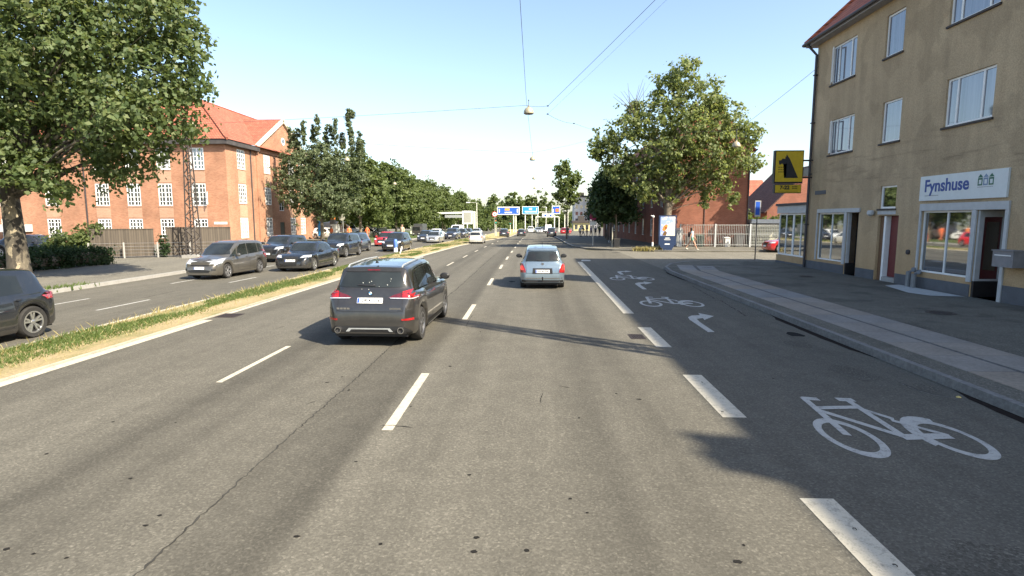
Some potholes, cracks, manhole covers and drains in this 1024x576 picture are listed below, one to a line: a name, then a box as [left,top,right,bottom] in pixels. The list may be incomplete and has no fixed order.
crack [133,337,401,576]
